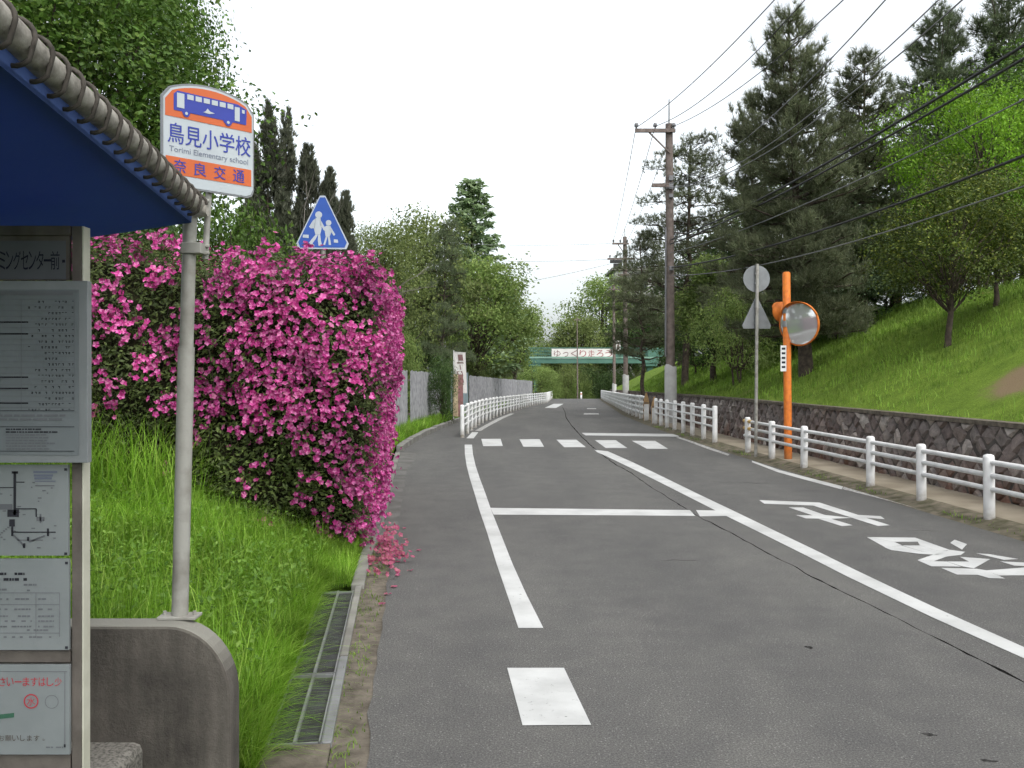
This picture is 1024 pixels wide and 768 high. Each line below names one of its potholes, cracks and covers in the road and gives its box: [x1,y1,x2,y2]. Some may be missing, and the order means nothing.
drain grate [266,673,335,746]
drain grate [293,590,354,675]
